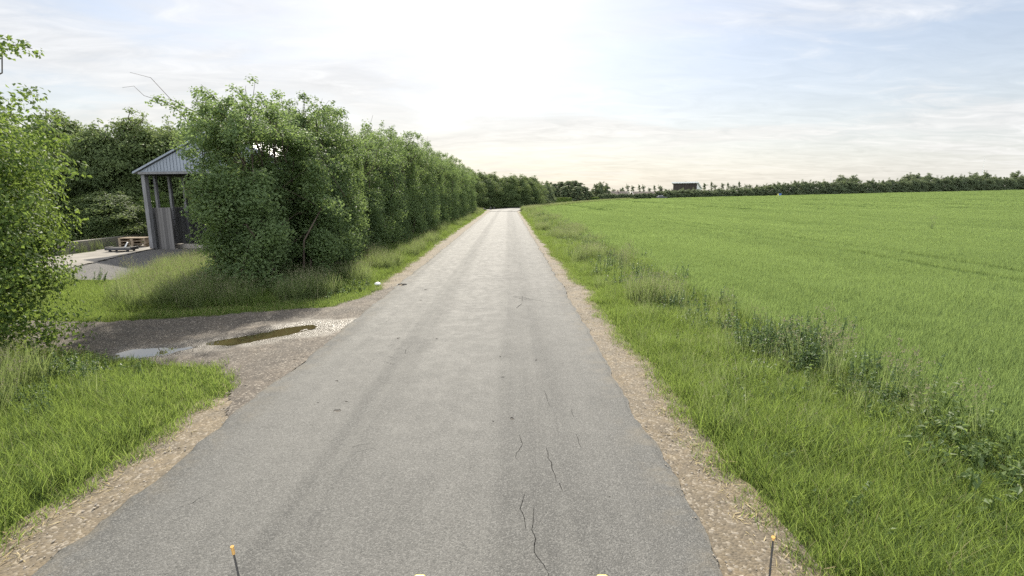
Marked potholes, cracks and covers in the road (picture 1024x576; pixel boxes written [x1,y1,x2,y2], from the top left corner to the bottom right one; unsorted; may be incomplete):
crack [516,408,585,576]
crack [542,391,552,406]
crack [511,296,549,309]
crack [512,434,525,459]
